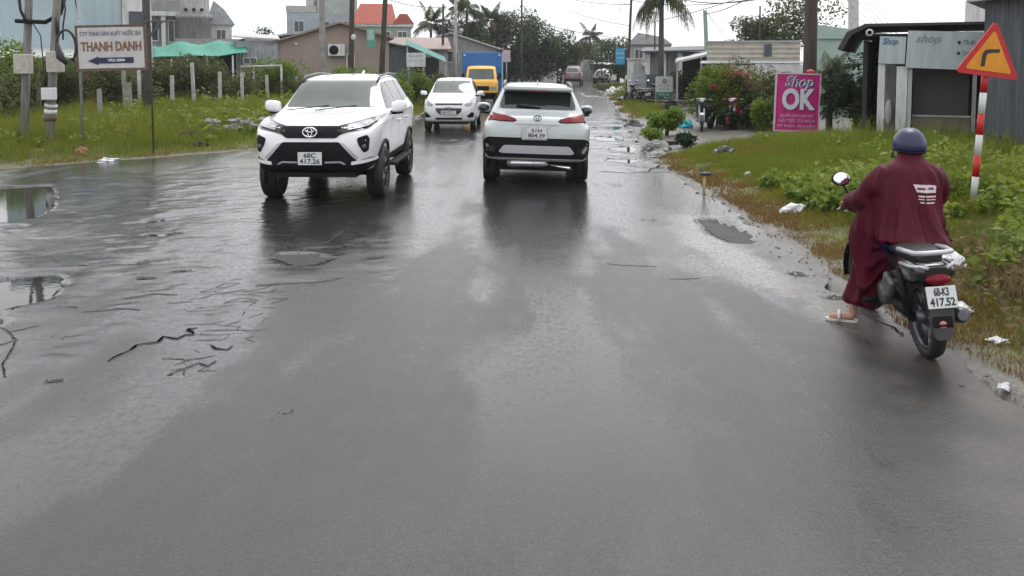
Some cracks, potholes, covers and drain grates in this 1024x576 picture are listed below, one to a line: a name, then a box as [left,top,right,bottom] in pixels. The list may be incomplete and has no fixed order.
crack [83,277,343,375]
crack [0,325,39,377]
pothole [268,252,336,266]
